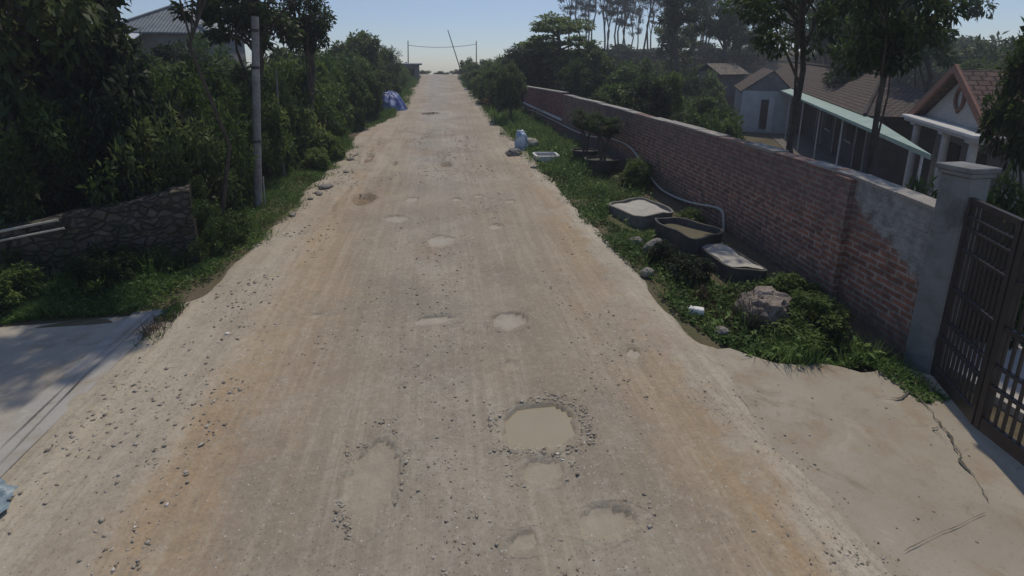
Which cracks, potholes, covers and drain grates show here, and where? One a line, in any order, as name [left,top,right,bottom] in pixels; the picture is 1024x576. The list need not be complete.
pothole [378,214,414,224]
pothole [489,396,590,464]
pothole [483,309,537,333]
pothole [397,312,472,328]
pothole [497,523,555,559]
pothole [336,424,407,549]
pothole [561,497,657,550]
pothole [423,233,461,249]
pothole [346,191,382,208]
pothole [619,343,646,364]
crack [874,392,988,551]
pothole [507,453,579,491]
